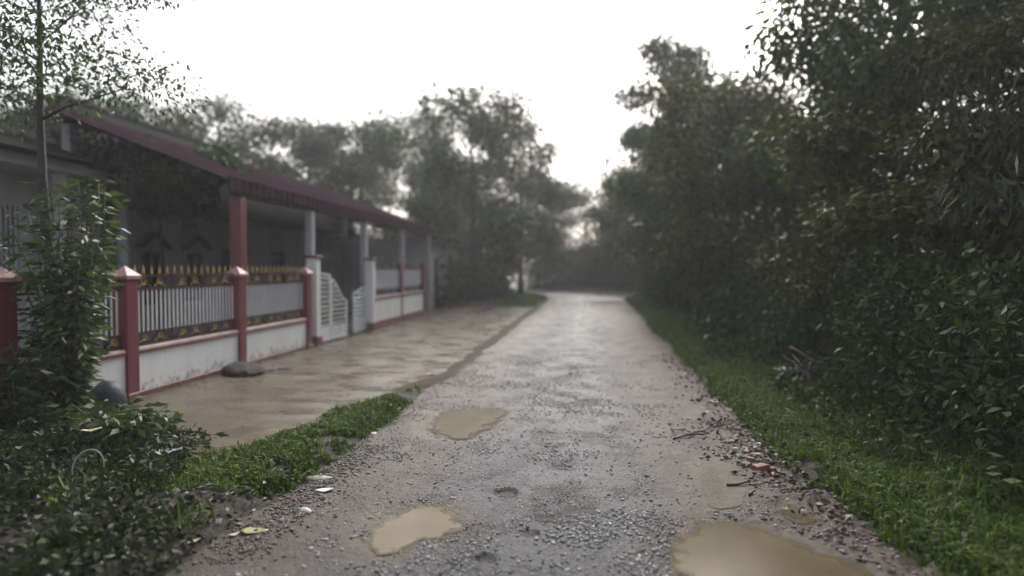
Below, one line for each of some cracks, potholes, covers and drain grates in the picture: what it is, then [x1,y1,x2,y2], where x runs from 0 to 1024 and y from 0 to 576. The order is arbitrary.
pothole [699,460,746,509]
pothole [371,506,463,556]
pothole [426,407,509,440]
pothole [494,487,518,497]
pothole [670,522,882,576]
pothole [470,551,496,564]
